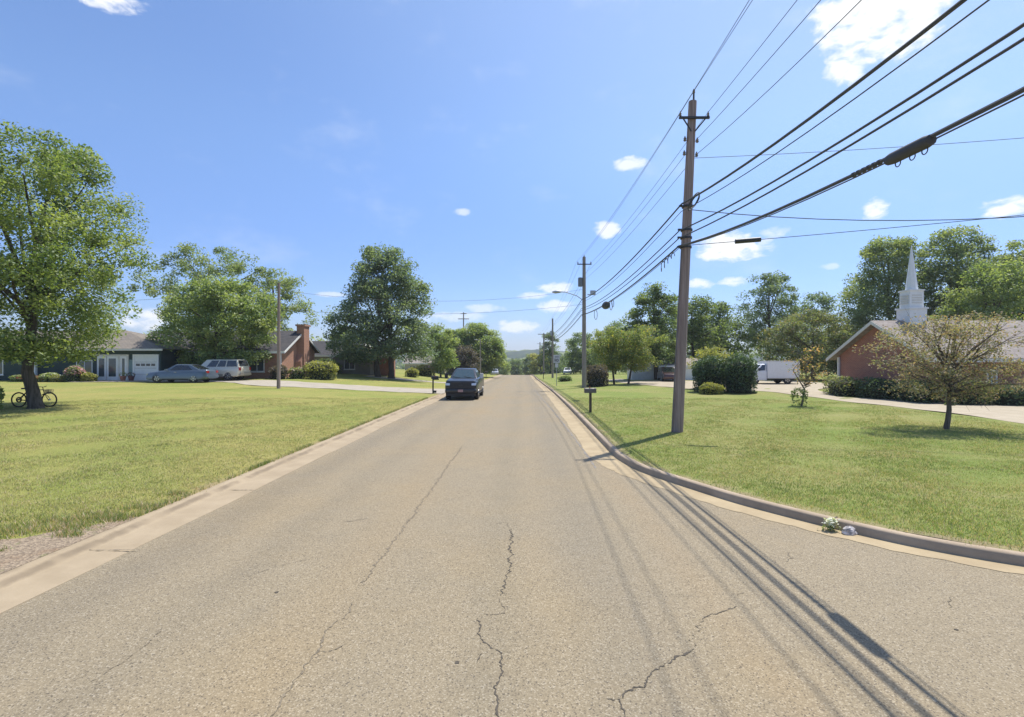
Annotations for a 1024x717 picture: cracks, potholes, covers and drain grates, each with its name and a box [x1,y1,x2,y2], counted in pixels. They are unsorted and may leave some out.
crack [270,603,353,717]
crack [606,592,744,717]
crack [477,522,514,717]
crack [361,447,462,585]
